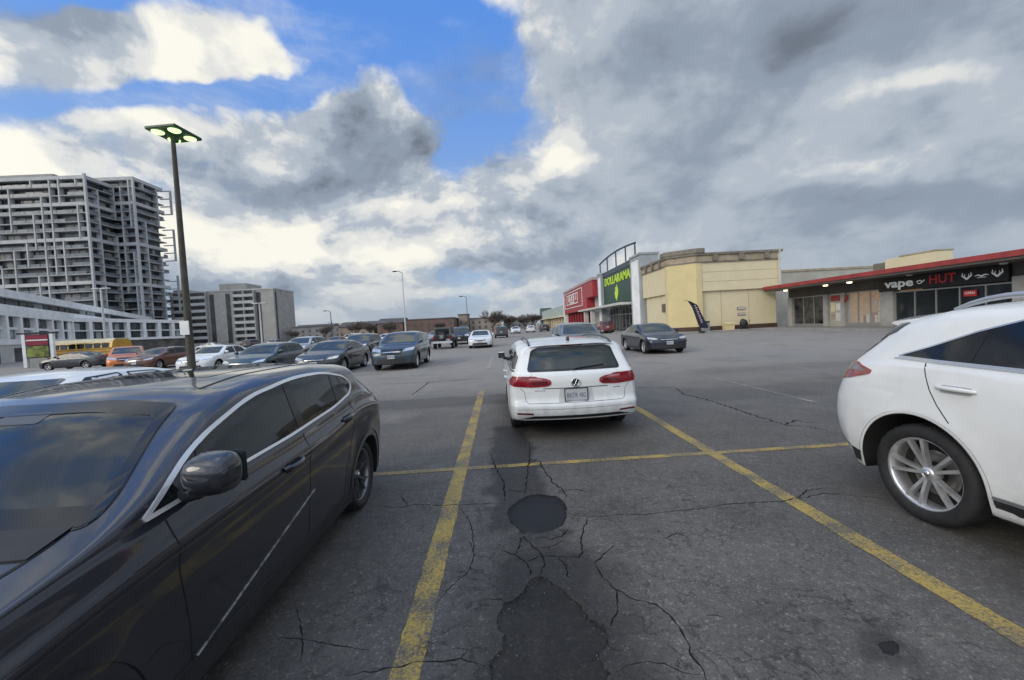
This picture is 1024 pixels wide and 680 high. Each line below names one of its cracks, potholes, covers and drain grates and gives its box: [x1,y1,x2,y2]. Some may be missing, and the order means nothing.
crack [282,609,488,675]
pothole [877,640,899,656]
crack [373,445,586,601]
pothole [507,494,567,534]
crack [500,488,882,680]
crack [639,387,827,432]
